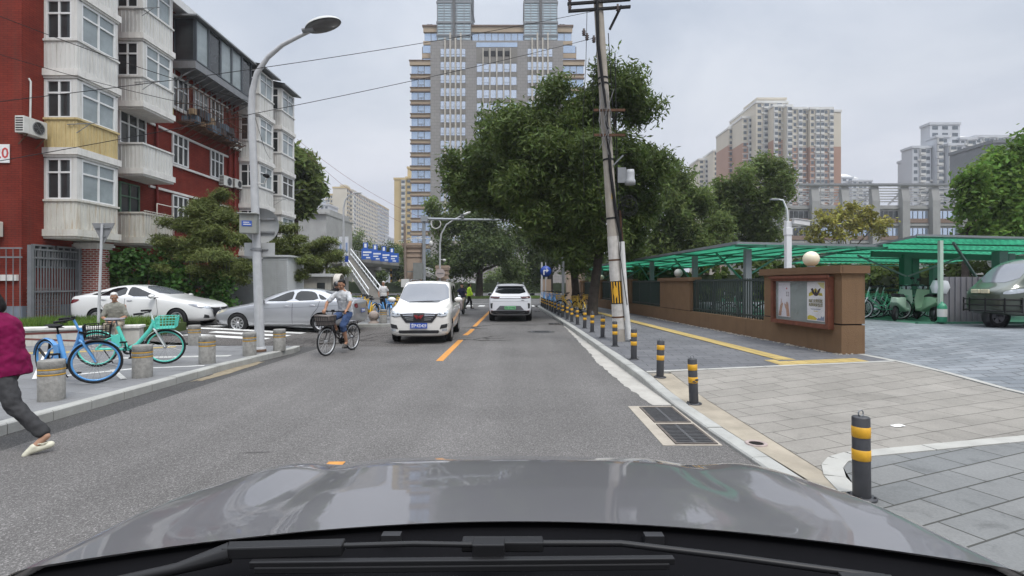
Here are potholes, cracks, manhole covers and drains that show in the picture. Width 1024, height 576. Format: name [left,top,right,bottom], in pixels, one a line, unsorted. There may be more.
drain grate [656,424,718,444]
drain grate [639,407,691,423]
